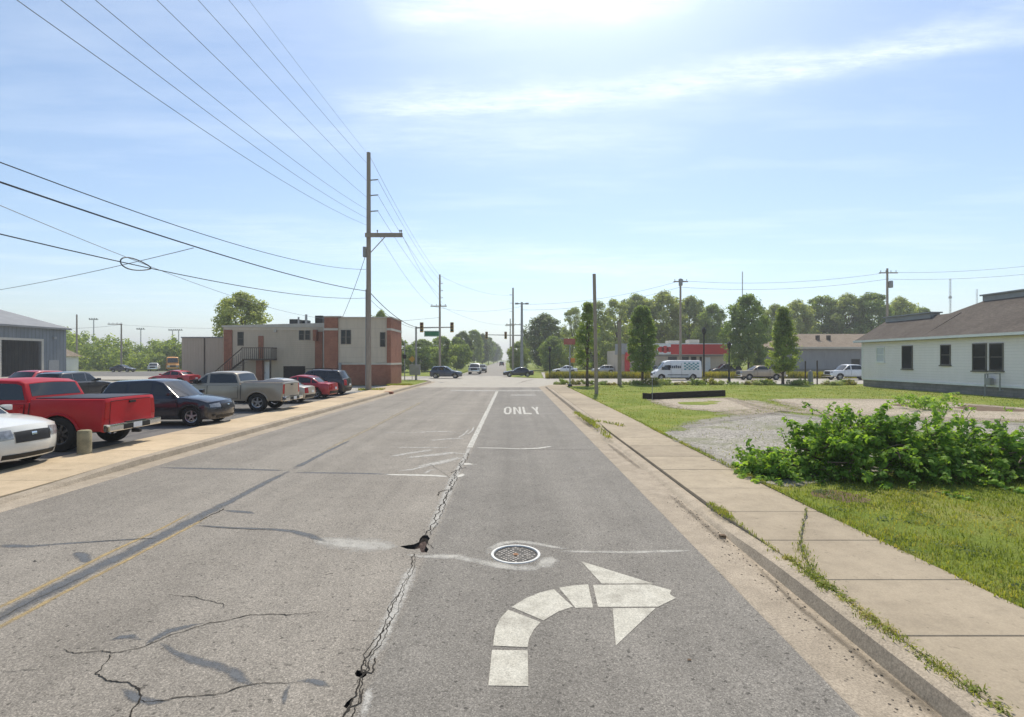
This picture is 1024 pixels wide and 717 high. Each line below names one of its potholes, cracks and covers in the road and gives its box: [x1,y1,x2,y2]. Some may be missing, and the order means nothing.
crack [63,595,323,717]
manhole cover [491,545,540,564]
crack [342,453,469,717]
